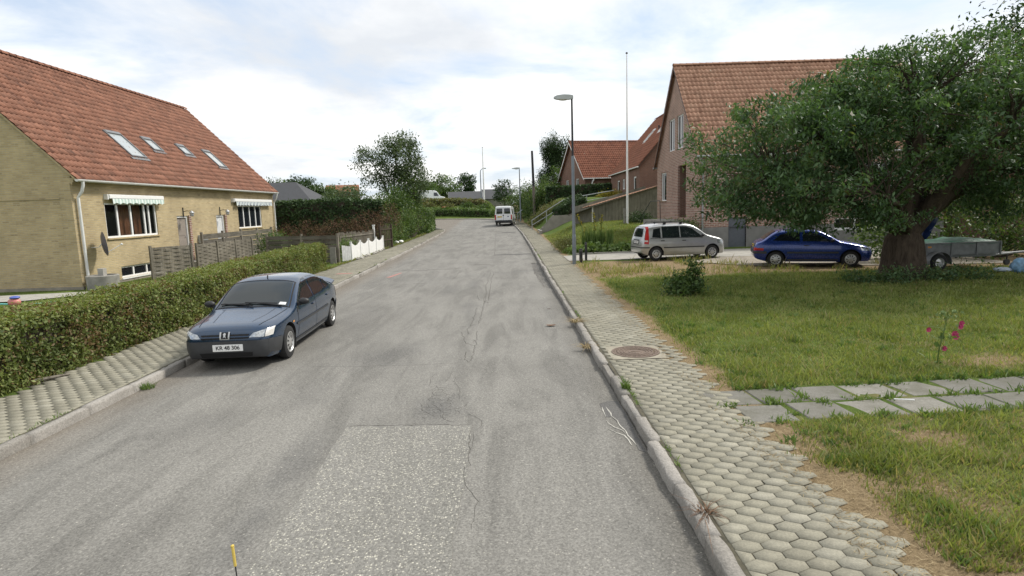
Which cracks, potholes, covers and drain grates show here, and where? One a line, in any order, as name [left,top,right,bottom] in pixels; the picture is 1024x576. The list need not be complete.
crack [360,363,482,428]
manhole cover [605,345,668,360]
crack [458,433,479,530]
crack [461,232,497,362]
